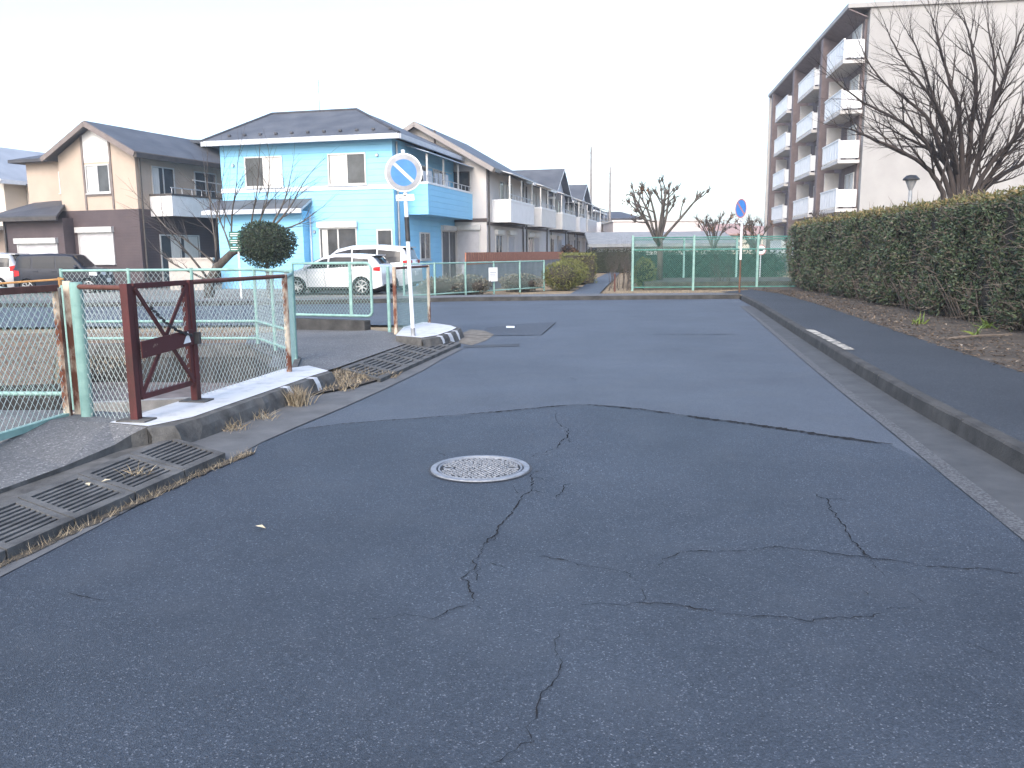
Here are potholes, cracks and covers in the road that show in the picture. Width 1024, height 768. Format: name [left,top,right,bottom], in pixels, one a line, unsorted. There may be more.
manhole cover [428,455,532,483]
crack [582,588,925,621]
crack [486,634,563,766]
crack [658,494,1013,573]
crack [369,470,541,619]
